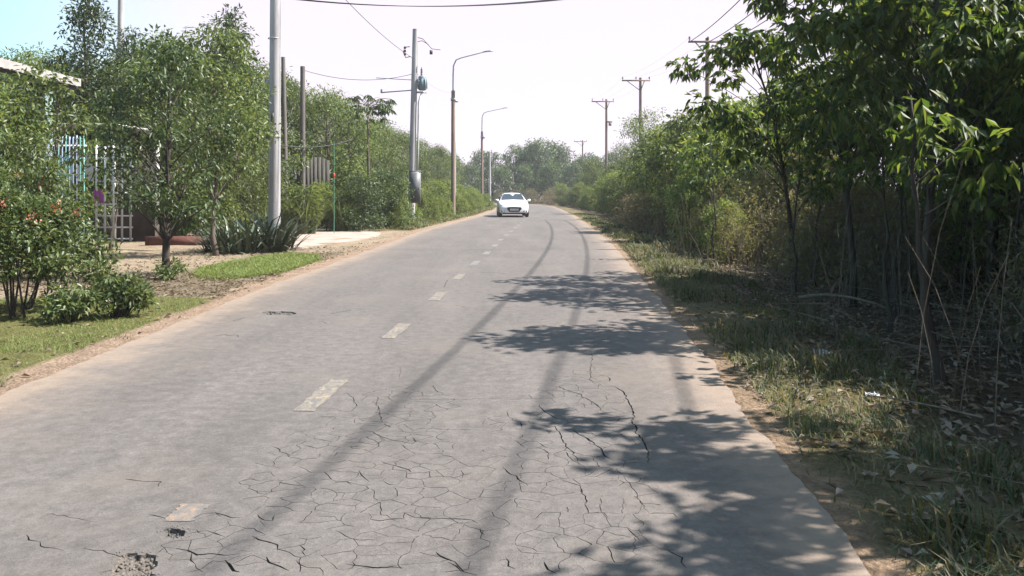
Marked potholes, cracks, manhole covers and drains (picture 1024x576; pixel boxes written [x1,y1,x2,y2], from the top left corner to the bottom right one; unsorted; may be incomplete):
pothole [157,525,192,543]
crack [502,354,684,574]
crack [85,370,511,575]
pothole [101,547,168,576]
